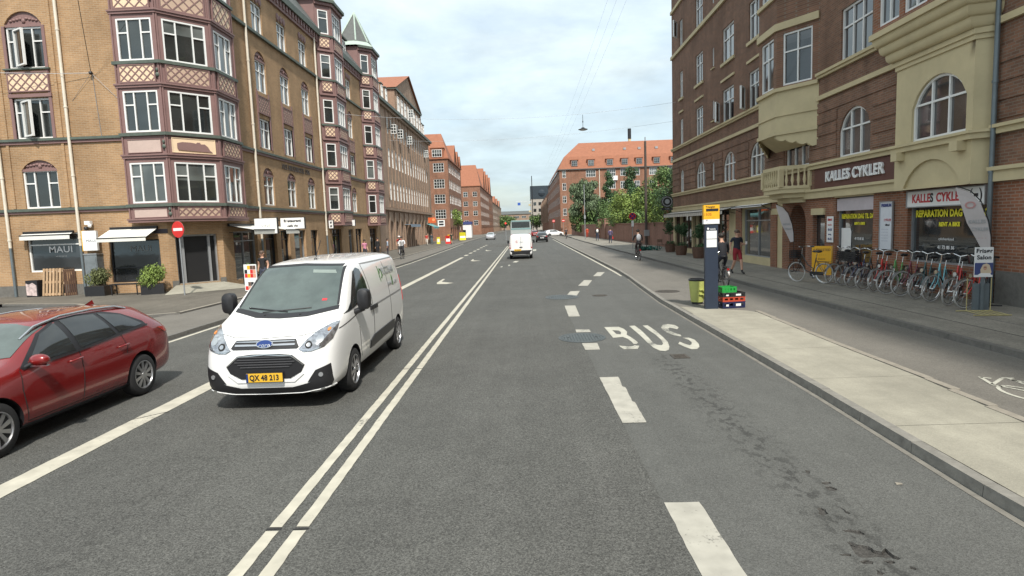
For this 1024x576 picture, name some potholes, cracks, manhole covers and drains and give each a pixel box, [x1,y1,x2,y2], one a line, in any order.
pothole [848,542,900,560]
manhole cover [559,333,606,343]
